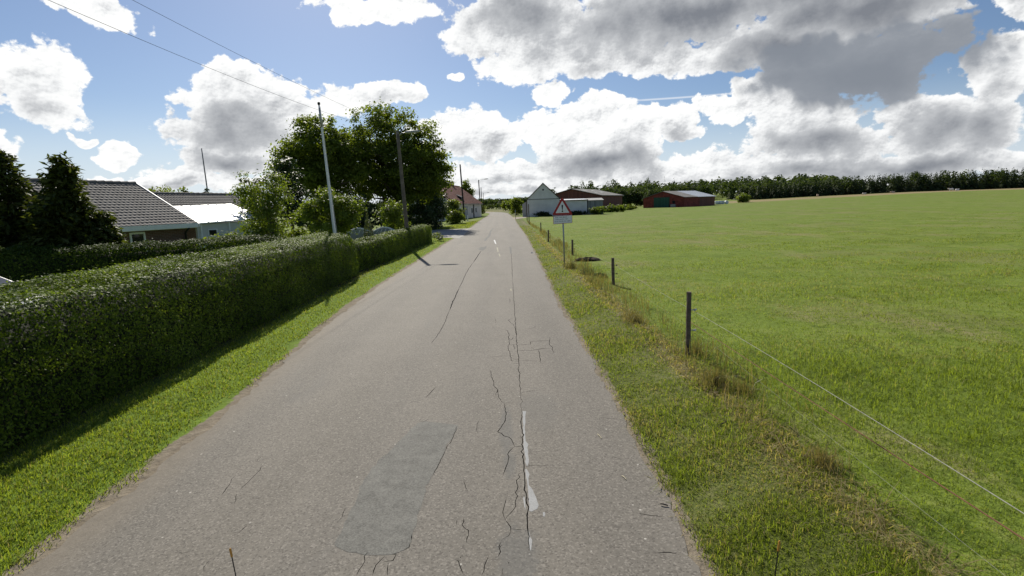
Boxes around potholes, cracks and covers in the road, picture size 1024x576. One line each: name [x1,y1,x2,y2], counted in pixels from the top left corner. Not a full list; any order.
crack [482,256,553,574]
crack [357,536,412,575]
